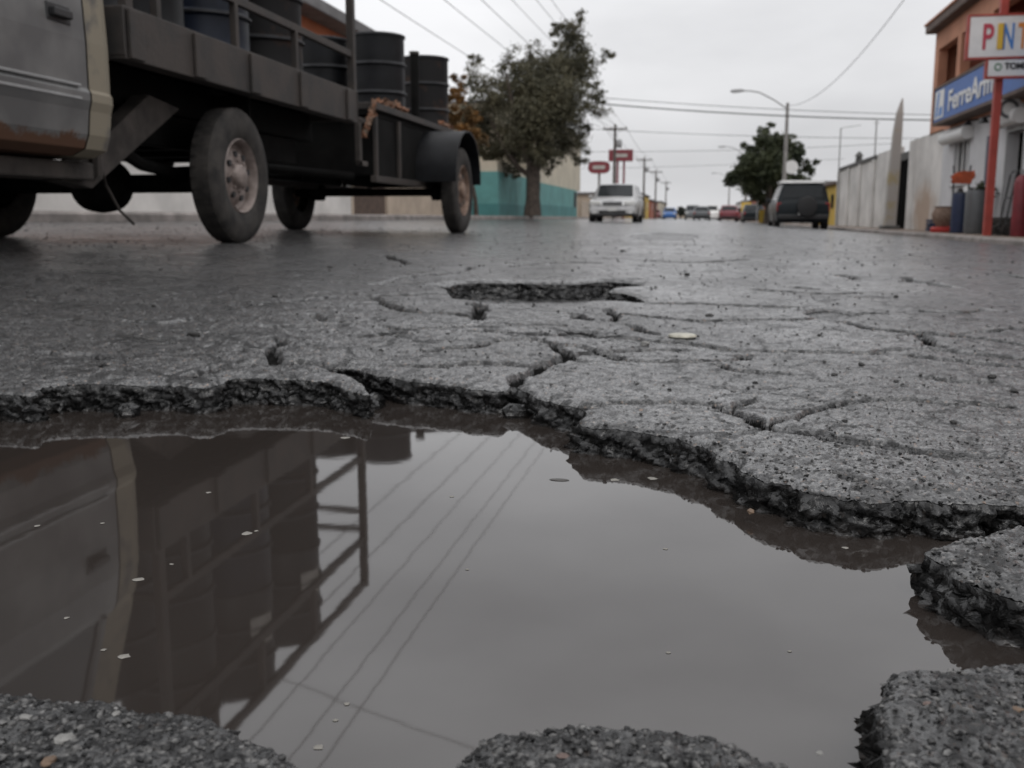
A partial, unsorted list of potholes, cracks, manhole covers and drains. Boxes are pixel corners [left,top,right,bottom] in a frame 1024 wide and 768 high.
crack [191,327,334,389]
pothole [0,368,1024,768]
crack [509,329,886,388]
crack [581,399,924,455]
crack [357,257,515,368]
pothole [440,282,645,304]
crack [851,316,1004,365]
